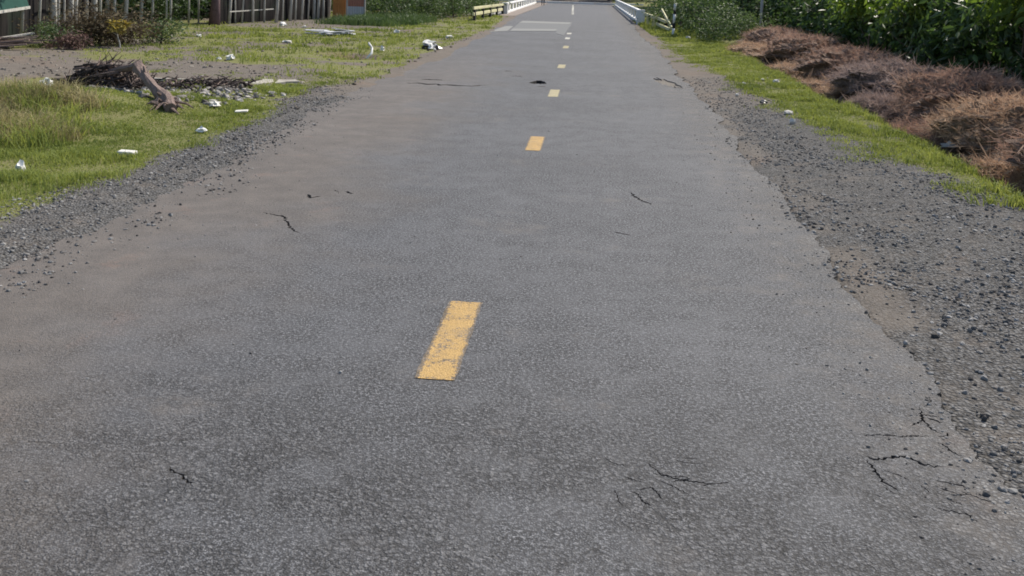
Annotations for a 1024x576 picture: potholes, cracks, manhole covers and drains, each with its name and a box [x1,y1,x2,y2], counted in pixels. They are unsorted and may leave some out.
crack [168,466,192,485]
crack [263,212,299,233]
crack [606,458,728,506]
crack [864,399,991,522]
